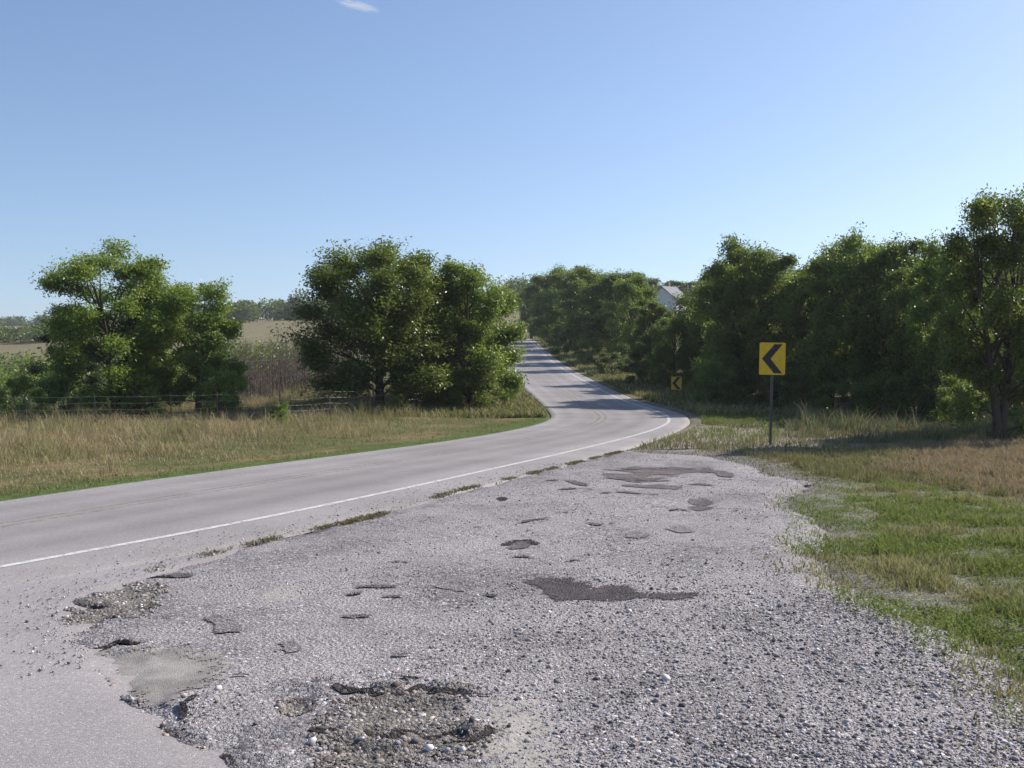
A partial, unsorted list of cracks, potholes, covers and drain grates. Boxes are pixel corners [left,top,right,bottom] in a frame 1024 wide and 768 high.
pothole [278,640,302,653]
pothole [666,525,694,533]
pothole [203,614,241,633]
pothole [61,581,175,628]
pothole [597,467,716,482]
pothole [686,497,717,512]
pothole [622,481,683,489]
pothole [516,574,711,601]
pothole [626,531,649,539]
pothole [294,679,524,768]
pothole [507,540,536,549]
